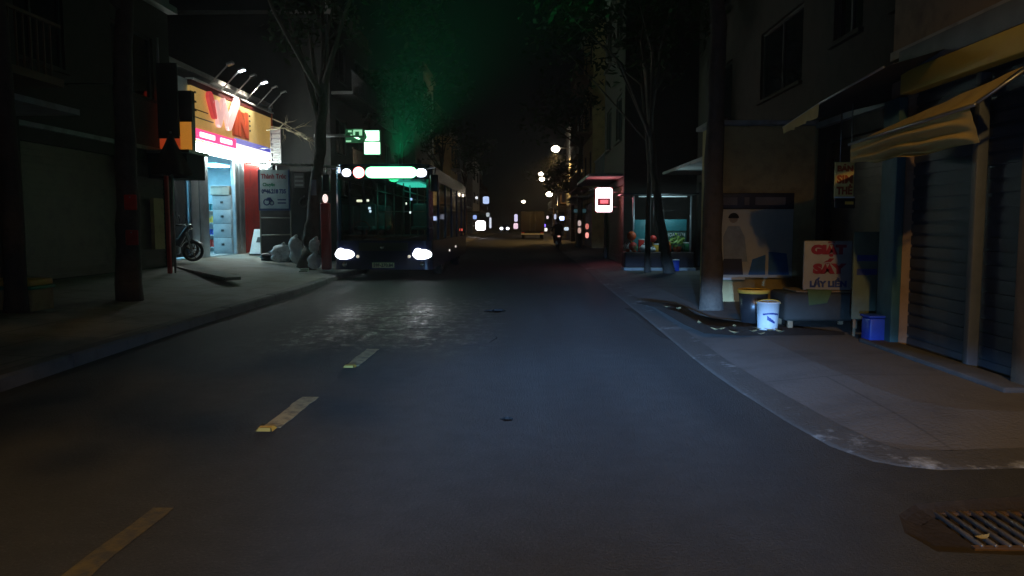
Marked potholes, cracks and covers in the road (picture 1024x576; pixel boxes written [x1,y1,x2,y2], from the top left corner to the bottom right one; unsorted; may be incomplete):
drain grate [899,497,1024,555]
